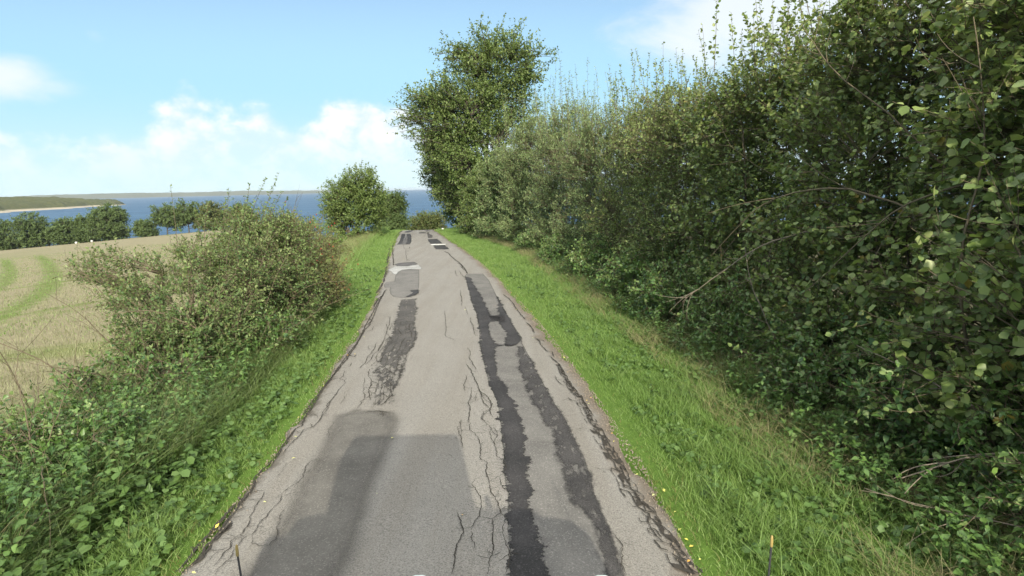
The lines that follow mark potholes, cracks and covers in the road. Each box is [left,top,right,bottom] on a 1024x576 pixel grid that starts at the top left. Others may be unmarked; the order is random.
crack [176,232,416,574]
crack [444,292,518,574]
crack [503,294,703,574]
